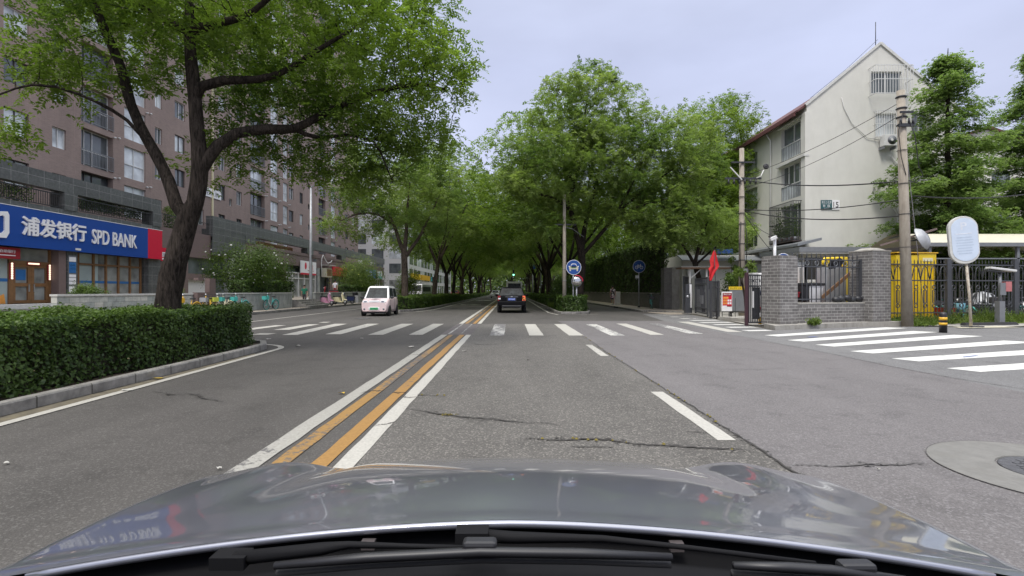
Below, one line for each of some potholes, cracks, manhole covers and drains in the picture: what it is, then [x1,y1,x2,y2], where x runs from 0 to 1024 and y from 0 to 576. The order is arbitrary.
crack [788,459,923,467]
manhole cover [925,440,1024,494]
crack [365,390,754,452]
